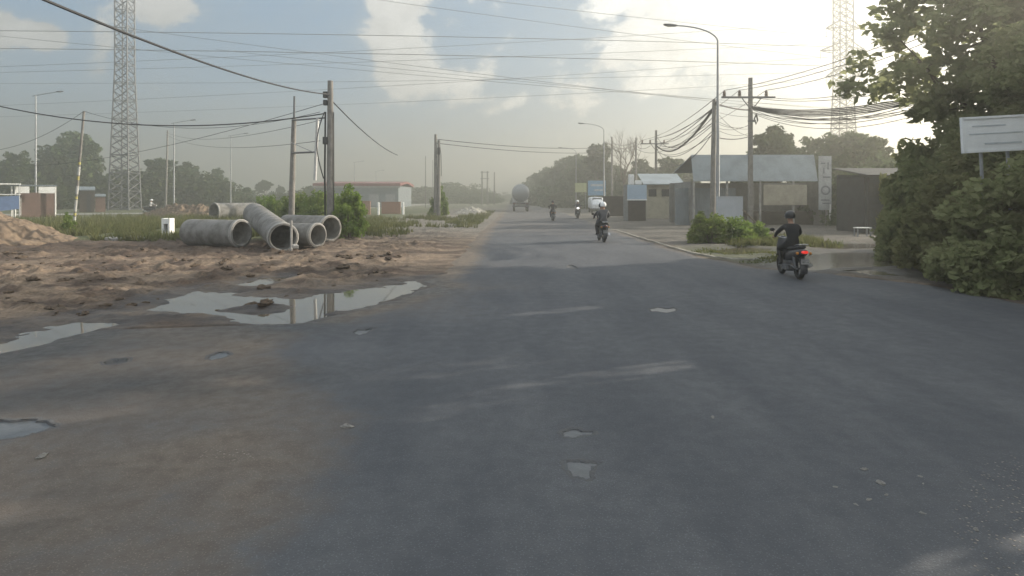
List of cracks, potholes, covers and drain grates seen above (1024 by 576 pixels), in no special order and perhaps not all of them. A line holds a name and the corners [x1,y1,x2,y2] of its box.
pothole [351,327,375,336]
pothole [99,357,133,365]
pothole [0,417,61,441]
pothole [204,351,234,361]
pothole [559,458,603,482]
pothole [556,427,599,439]
